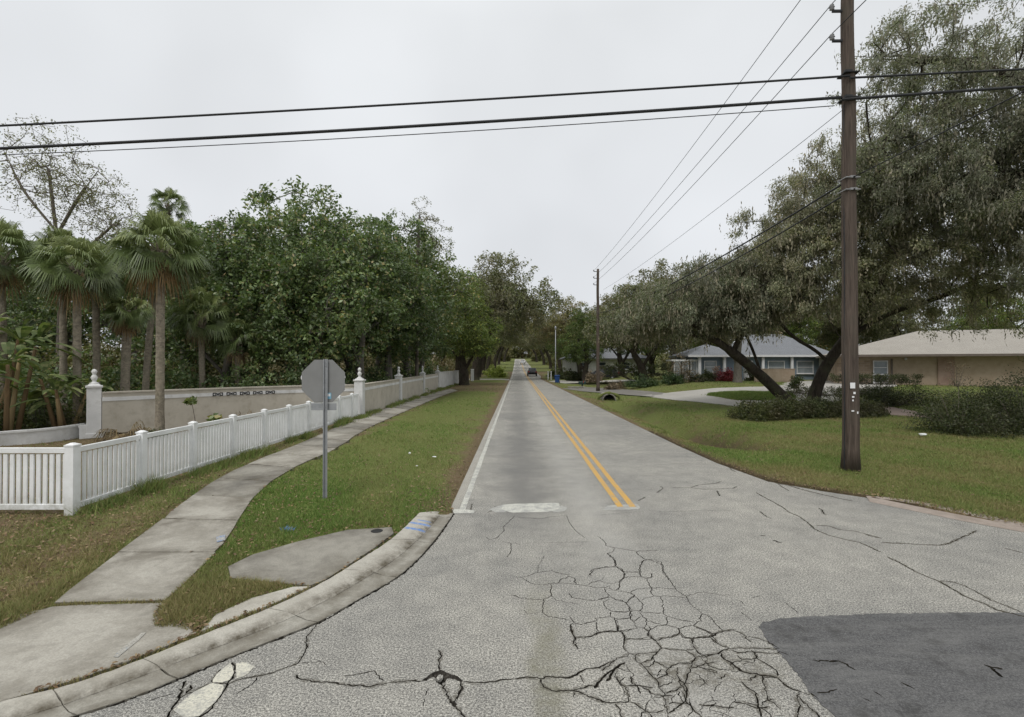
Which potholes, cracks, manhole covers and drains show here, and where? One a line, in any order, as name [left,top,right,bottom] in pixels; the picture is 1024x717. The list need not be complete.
crack [149,625,421,717]
crack [486,511,585,557]
pothole [422,650,465,717]
crack [463,539,855,717]
crack [757,483,1024,617]
